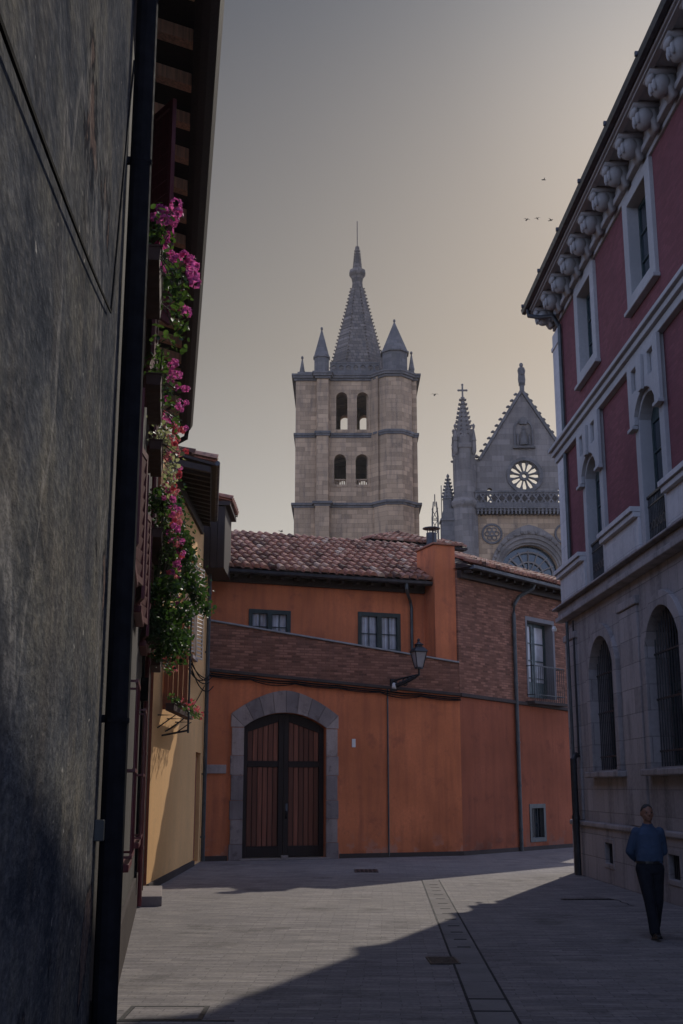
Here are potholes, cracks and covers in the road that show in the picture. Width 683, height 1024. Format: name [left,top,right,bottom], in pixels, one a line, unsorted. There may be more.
manhole cover [117,1006,235,1021]
drain grate [426,956,461,964]
